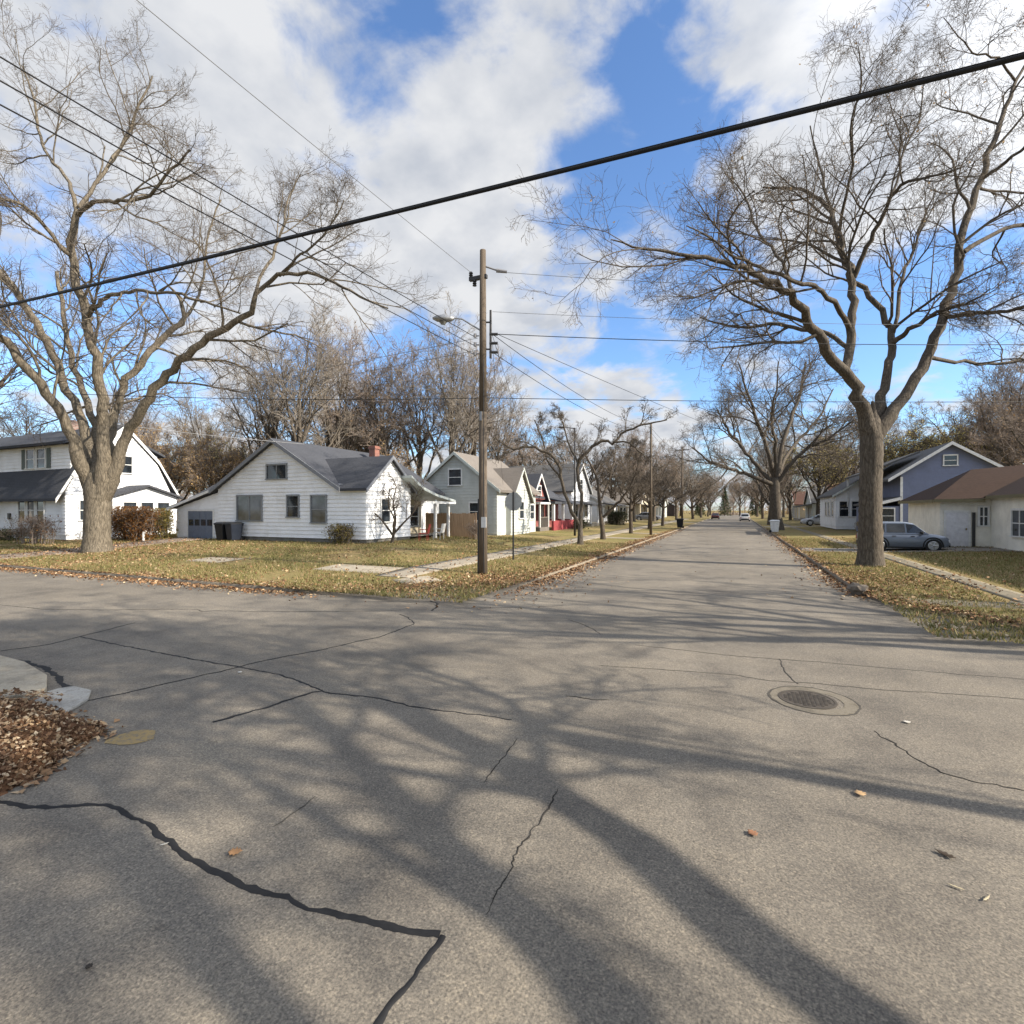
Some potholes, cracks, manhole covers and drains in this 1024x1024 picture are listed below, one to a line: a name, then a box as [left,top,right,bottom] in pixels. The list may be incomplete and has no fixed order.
crack [601,645,1024,700]
crack [4,605,601,635]
crack [875,731,1024,791]
manhole cover [768,686,861,716]
crack [487,789,558,913]
crack [274,796,315,826]
